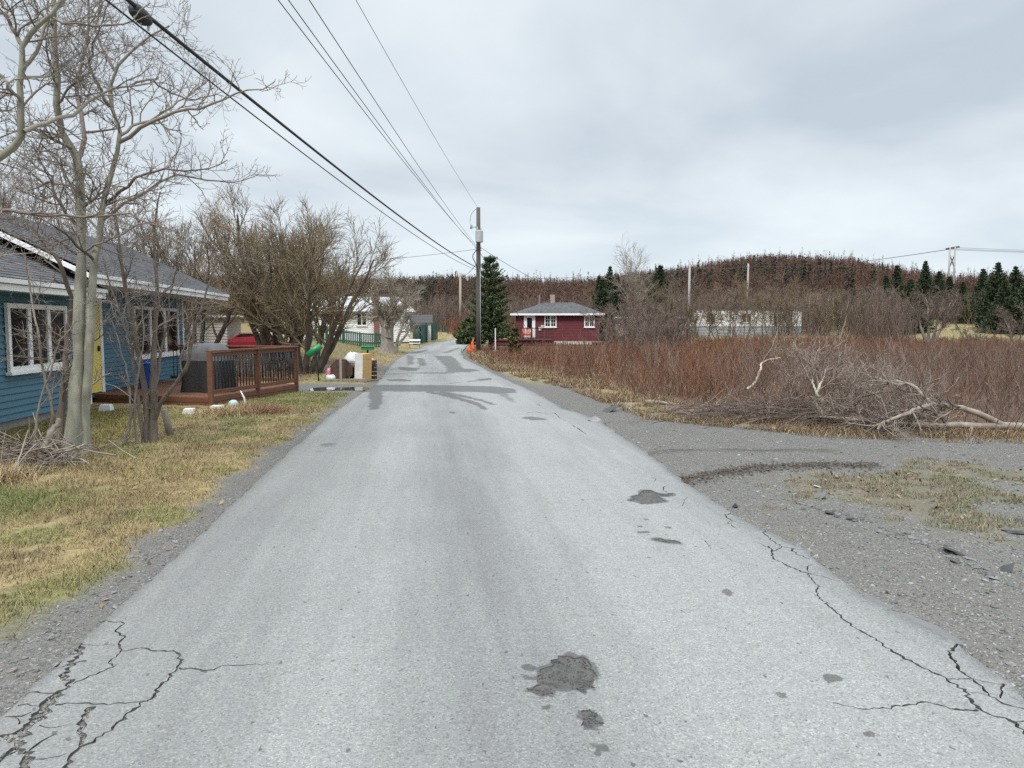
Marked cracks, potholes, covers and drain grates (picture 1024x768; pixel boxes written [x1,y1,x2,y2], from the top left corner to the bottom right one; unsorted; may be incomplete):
crack [724,513,1024,734]
pothole [581,709,605,728]
pothole [527,656,597,696]
crack [0,620,264,768]
pothole [629,490,673,504]
